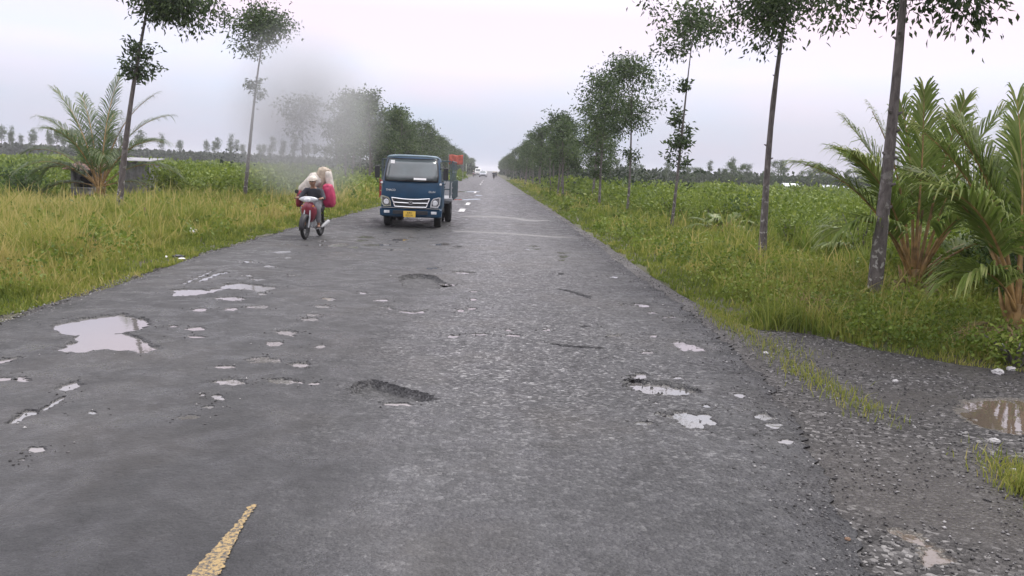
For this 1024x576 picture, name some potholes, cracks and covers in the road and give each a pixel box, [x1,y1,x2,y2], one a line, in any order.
pothole [47,311,167,354]
pothole [396,274,450,289]
pothole [620,378,704,397]
pothole [659,409,723,432]
pothole [3,408,40,424]
crack [559,289,591,299]
pothole [165,282,291,296]
pothole [346,379,439,402]
pothole [952,397,1024,435]
pothole [664,339,711,353]
pothole [40,395,66,410]
